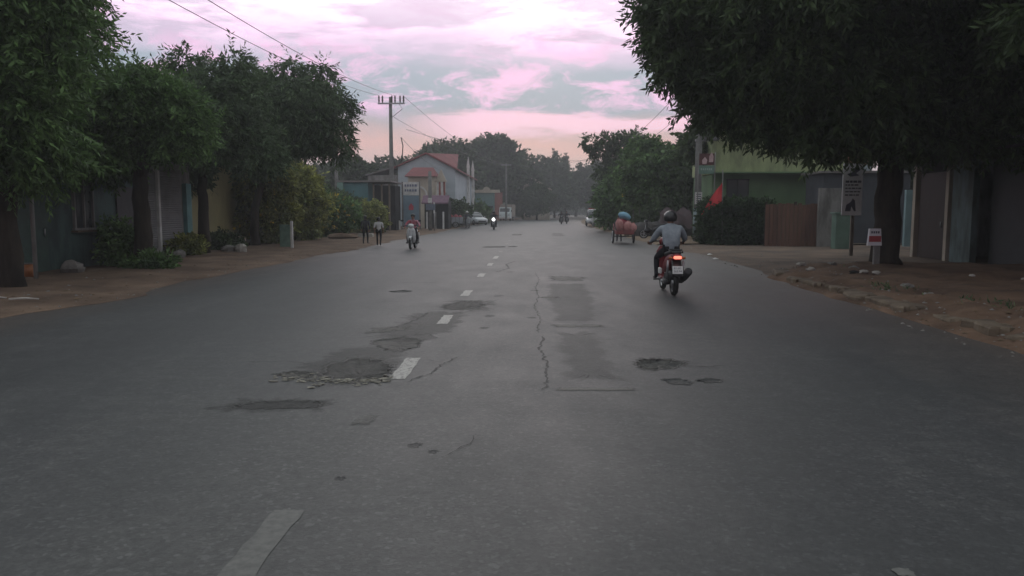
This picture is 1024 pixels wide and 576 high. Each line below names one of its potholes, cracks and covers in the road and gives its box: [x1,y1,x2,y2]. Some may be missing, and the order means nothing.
crack [532,274,549,389]
pothole [634,358,688,371]
pothole [230,399,324,409]
pothole [319,357,397,384]
pothole [442,301,486,310]
